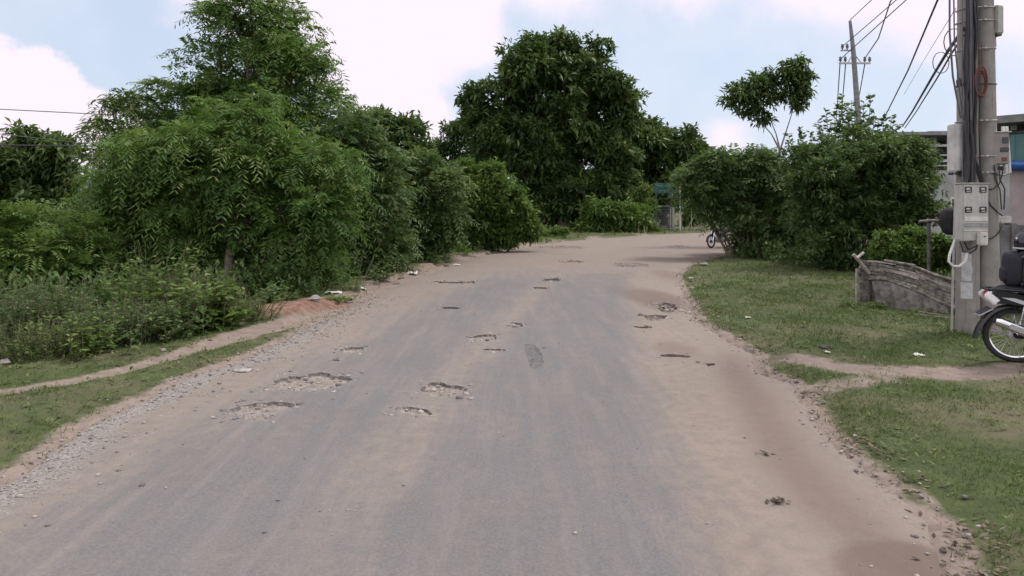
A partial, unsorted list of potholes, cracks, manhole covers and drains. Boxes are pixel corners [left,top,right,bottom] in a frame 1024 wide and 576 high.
pothole [648,301,692,314]
pothole [250,370,365,393]
pothole [333,345,370,354]
pothole [413,381,474,400]
pothole [209,398,304,423]
pothole [383,405,439,417]
pothole [466,333,501,343]
pothole [638,313,674,321]
